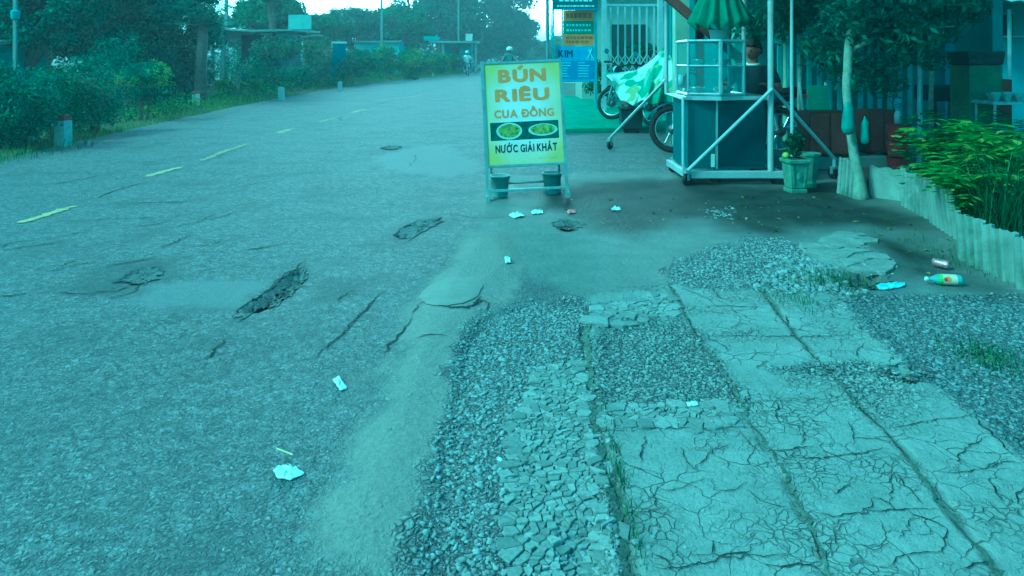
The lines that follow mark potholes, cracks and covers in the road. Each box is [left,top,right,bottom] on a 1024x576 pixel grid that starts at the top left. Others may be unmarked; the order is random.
pothole [392,217,444,241]
crack [653,470,948,569]
crack [570,381,1024,512]
crack [682,288,912,377]
pothole [550,219,584,231]
crack [440,296,489,309]
pothole [231,266,309,320]
crack [2,174,281,271]
pothole [112,266,166,285]
crack [318,290,447,355]
